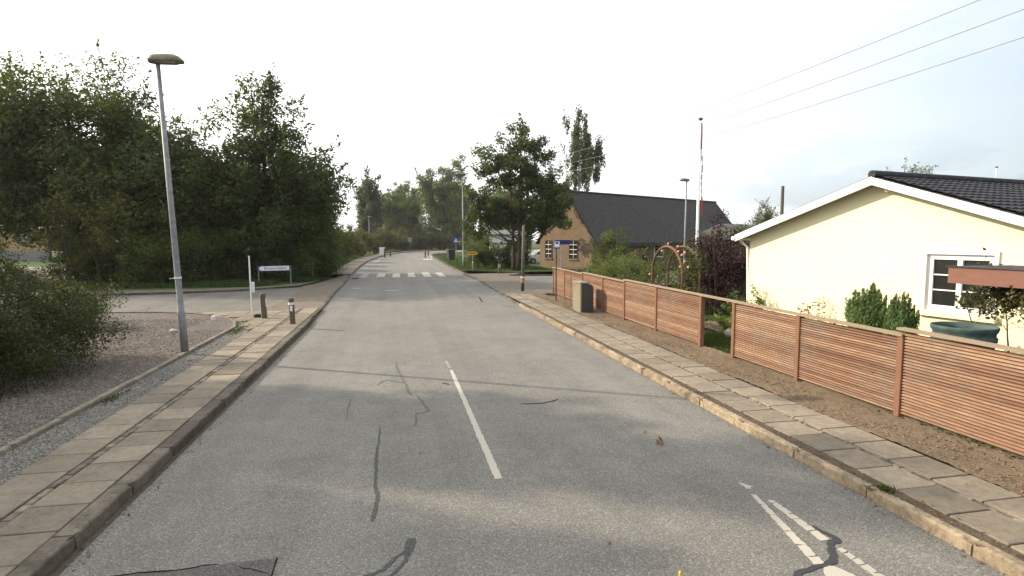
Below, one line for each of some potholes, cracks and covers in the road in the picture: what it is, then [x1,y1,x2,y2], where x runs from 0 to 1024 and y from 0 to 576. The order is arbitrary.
crack [378,362,449,427]
